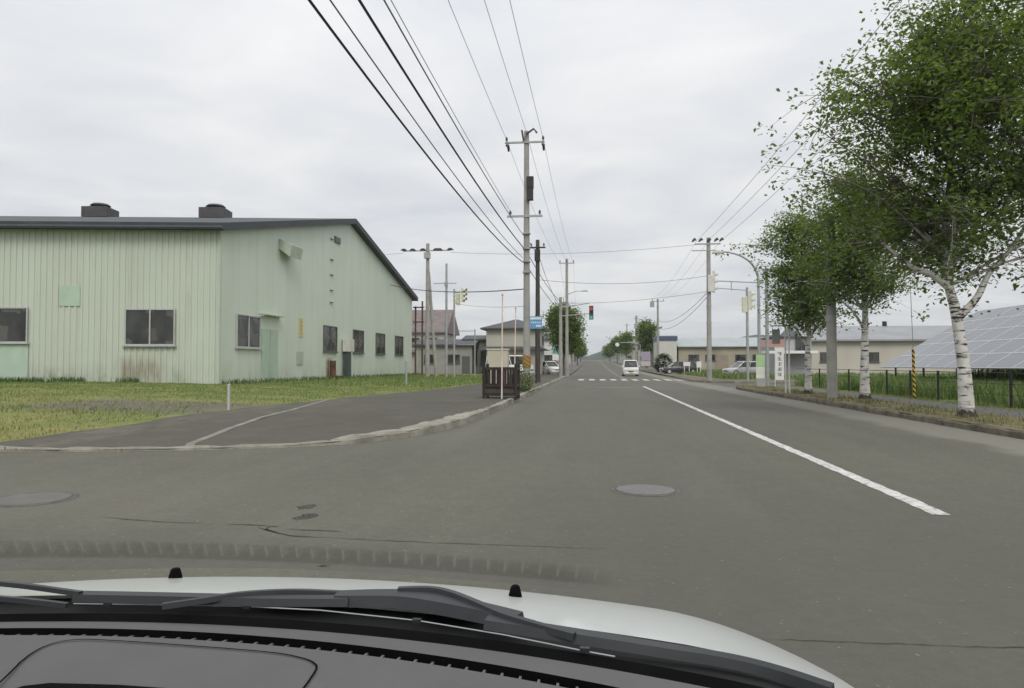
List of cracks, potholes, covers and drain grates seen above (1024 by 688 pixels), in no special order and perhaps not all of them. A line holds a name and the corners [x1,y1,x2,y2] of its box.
crack [238,524,329,537]
manhole cover [610,484,682,496]
manhole cover [0,491,79,507]
crack [780,639,1016,648]
